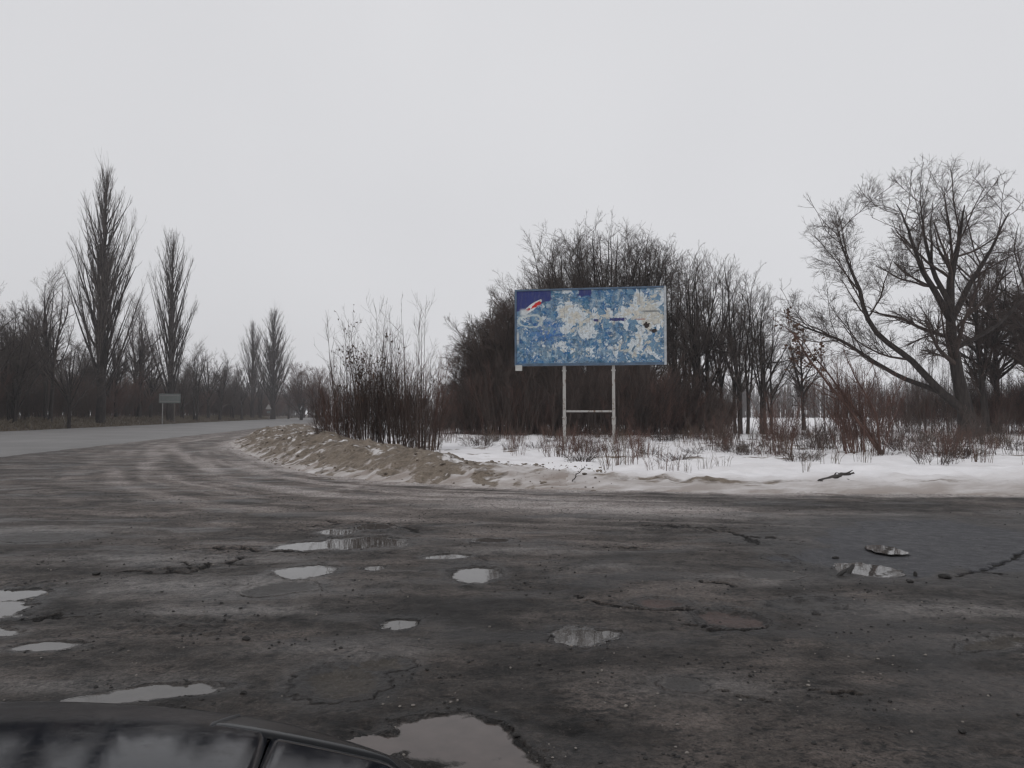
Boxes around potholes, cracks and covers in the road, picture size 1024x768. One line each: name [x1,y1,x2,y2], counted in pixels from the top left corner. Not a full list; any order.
pothole [60,681,236,704]
pothole [0,588,55,620]
pothole [347,712,548,768]
pothole [267,563,341,580]
pothole [446,566,504,584]
pothole [269,535,411,552]
pothole [5,640,87,652]
crack [641,525,776,543]
crack [949,554,1023,579]
pothole [547,625,623,650]
pothole [380,619,420,631]
